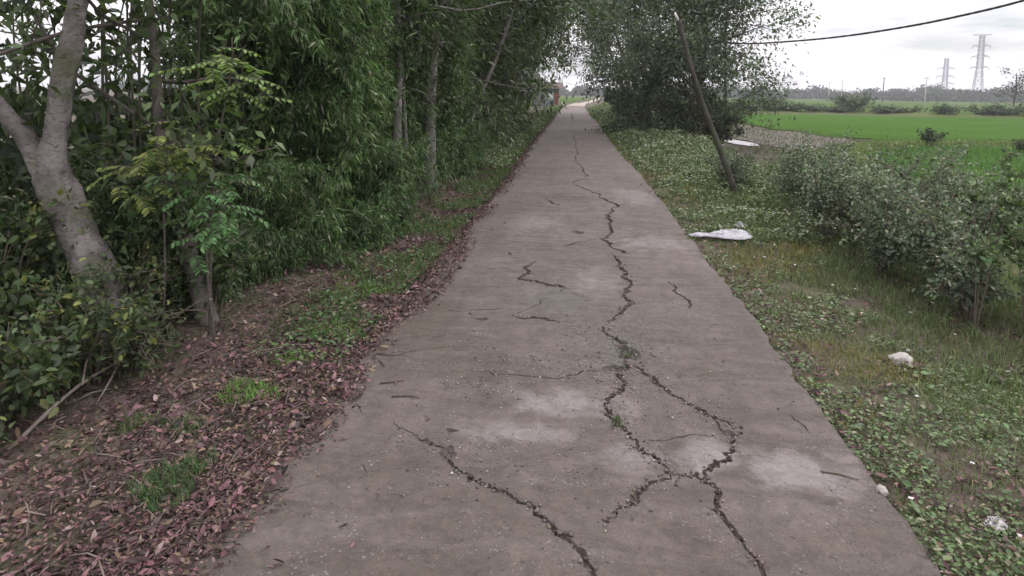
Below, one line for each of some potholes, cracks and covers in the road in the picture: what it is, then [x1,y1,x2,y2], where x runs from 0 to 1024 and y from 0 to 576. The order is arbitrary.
crack [393,135,766,576]
